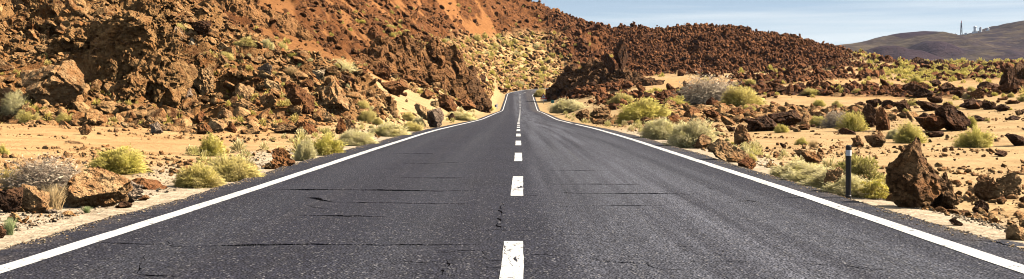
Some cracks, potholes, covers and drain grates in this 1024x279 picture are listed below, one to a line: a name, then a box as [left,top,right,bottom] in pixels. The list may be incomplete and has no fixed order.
crack [95,153,777,277]
